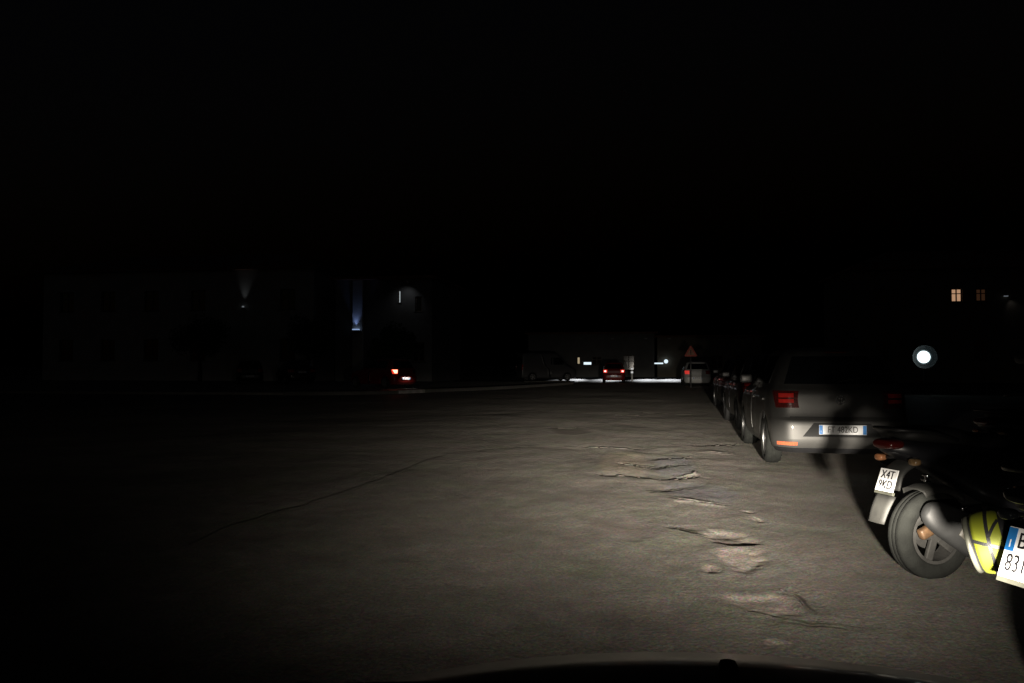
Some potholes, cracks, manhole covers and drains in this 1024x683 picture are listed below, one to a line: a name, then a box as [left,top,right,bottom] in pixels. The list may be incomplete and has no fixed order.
pothole [699,530,763,546]
pothole [700,564,723,573]
pothole [719,591,806,619]
pothole [714,547,772,575]
